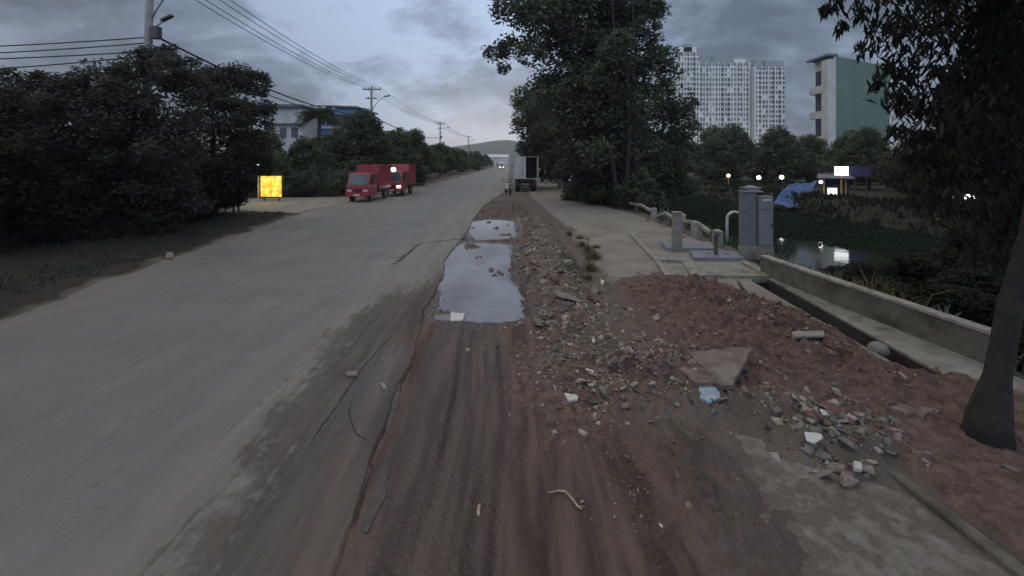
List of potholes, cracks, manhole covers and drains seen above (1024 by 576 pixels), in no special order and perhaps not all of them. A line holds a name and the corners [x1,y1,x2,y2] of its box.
crack [384,238,469,265]
crack [309,336,411,525]
pothole [467,218,524,240]
pothole [423,241,538,325]
